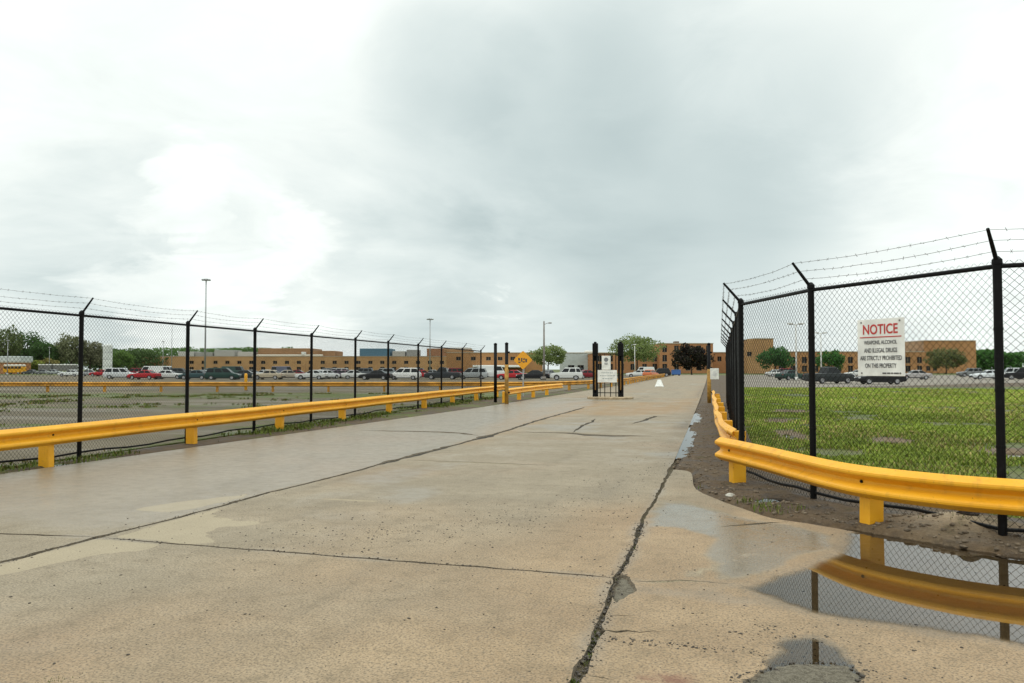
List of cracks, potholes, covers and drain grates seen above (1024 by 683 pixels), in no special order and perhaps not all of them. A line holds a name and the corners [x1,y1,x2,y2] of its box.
pothole [742,663,865,683]
